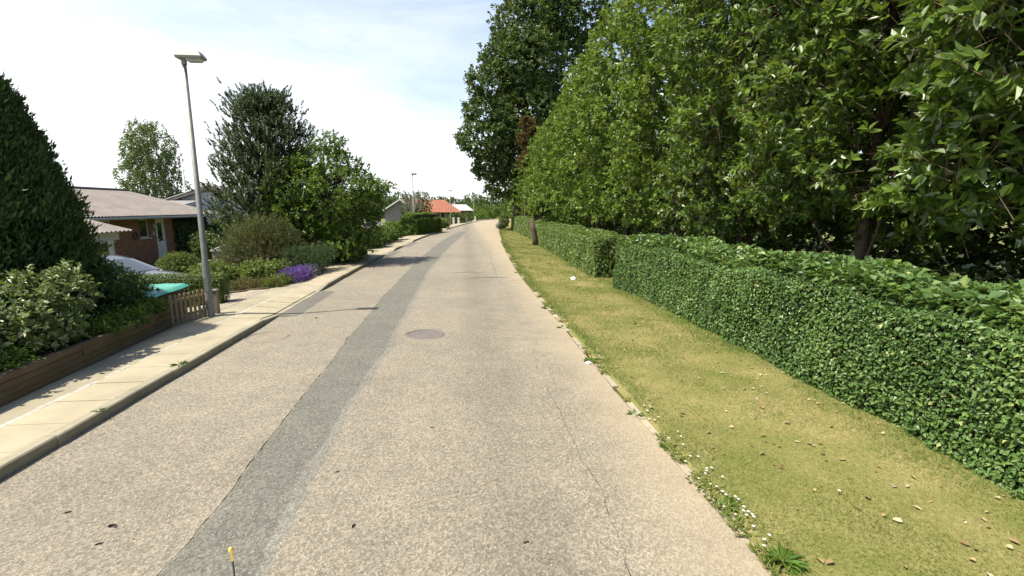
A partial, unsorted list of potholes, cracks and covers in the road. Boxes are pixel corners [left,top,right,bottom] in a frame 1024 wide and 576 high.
manhole cover [406,329,445,339]
crack [545,385,631,576]
